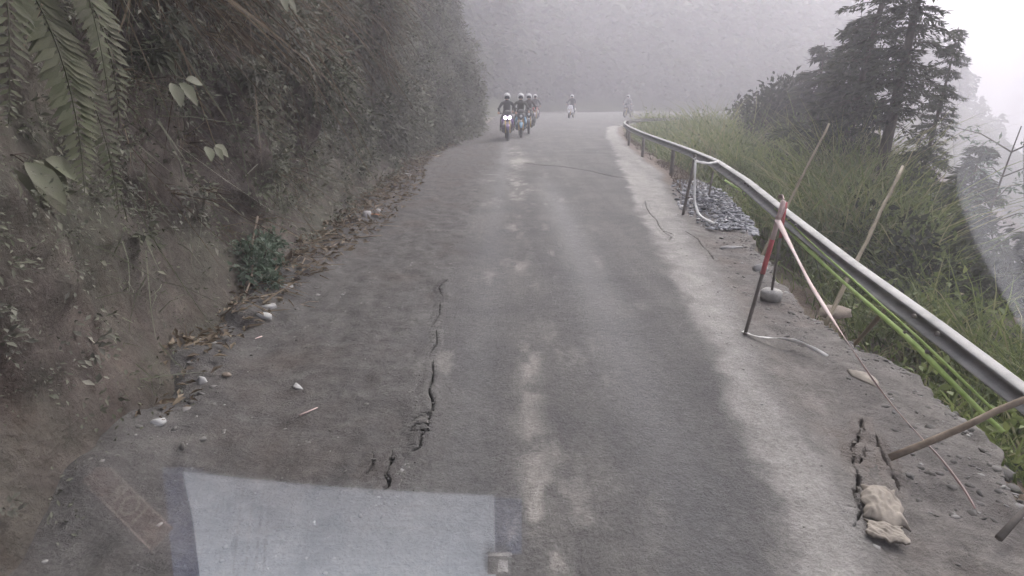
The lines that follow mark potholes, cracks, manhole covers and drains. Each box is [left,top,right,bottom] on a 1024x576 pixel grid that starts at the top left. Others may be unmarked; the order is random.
crack [836,413,914,534]
crack [642,201,719,261]
crack [350,278,453,500]
crack [523,163,631,179]
